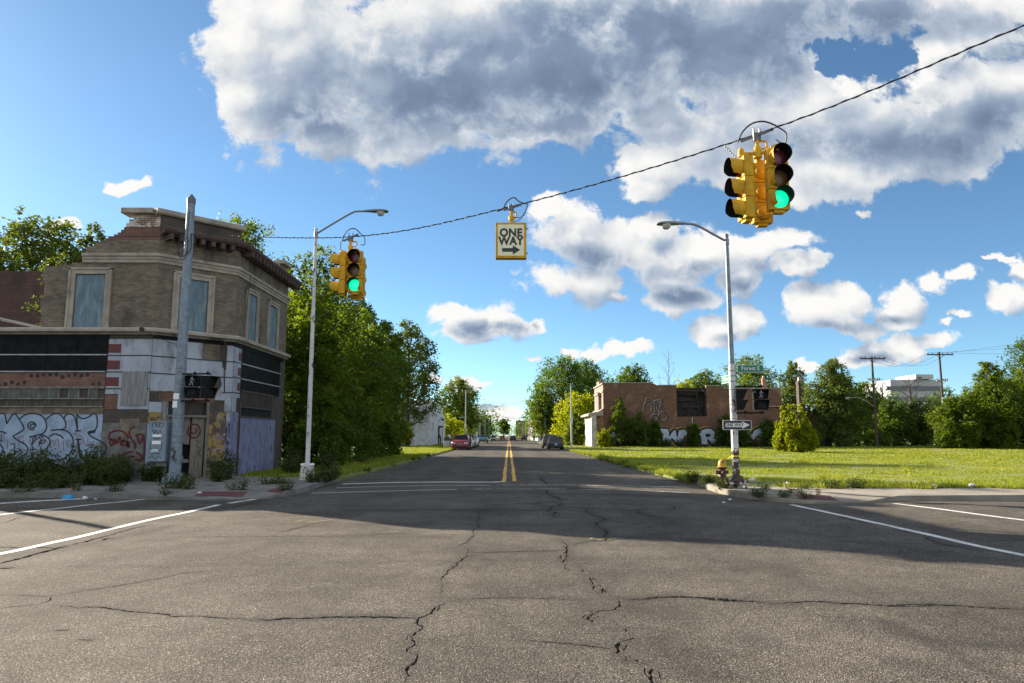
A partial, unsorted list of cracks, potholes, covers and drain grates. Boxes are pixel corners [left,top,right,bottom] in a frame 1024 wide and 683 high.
crack [7,476,1024,683]
